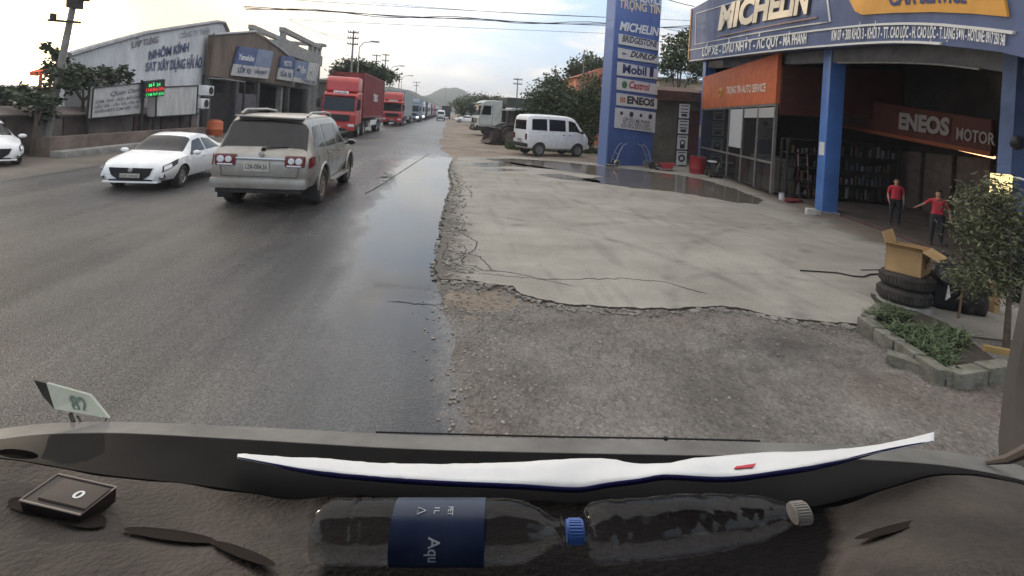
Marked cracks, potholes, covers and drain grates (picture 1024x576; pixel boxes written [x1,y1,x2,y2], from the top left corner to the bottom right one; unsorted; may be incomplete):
crack [441,168,708,294]
